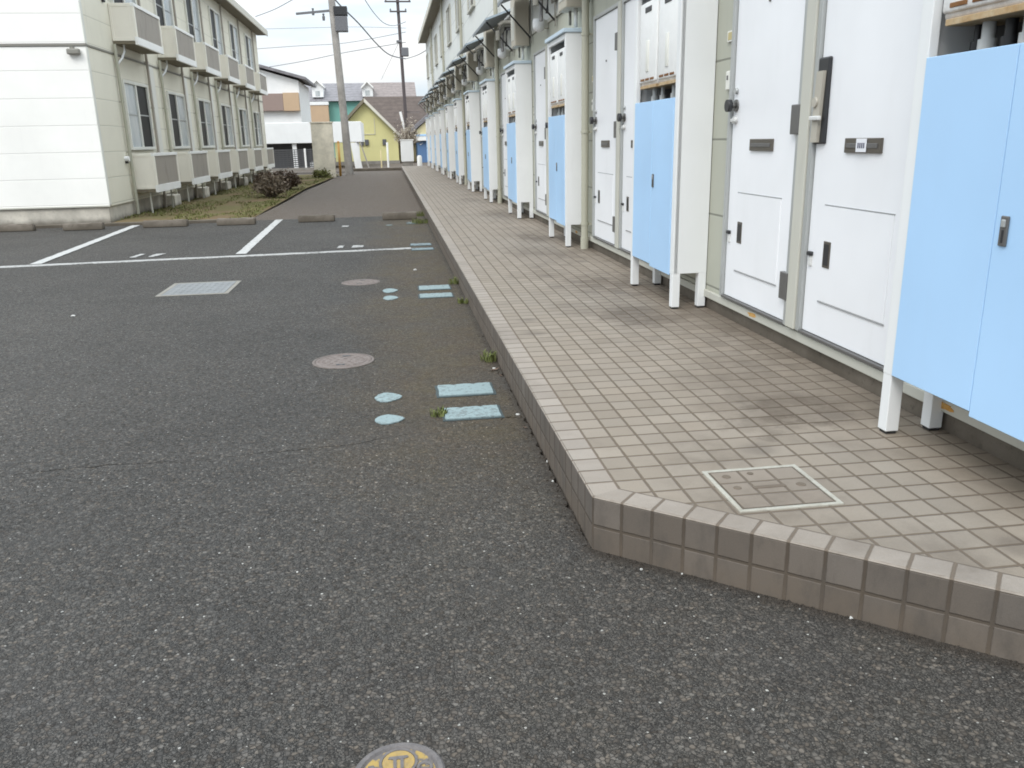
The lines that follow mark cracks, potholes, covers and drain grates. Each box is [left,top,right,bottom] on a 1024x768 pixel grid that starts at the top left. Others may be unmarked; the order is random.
manhole cover [355,742,445,768]
utility cover [702,464,844,513]
manhole cover [312,353,374,369]
manhole cover [155,280,242,297]
